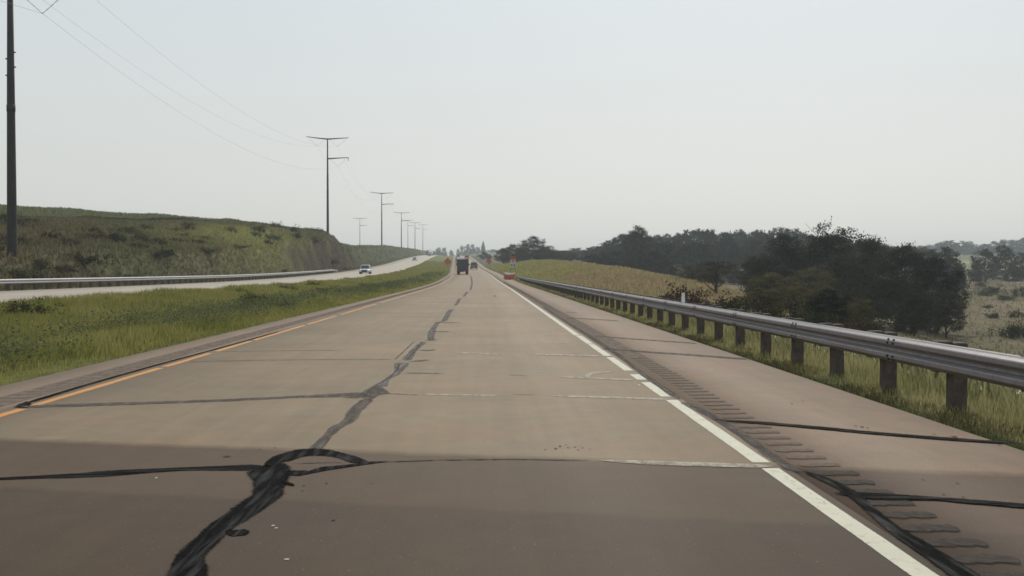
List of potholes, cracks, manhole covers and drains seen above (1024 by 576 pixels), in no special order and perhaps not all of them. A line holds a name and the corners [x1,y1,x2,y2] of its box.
crack [379,322,459,395]
